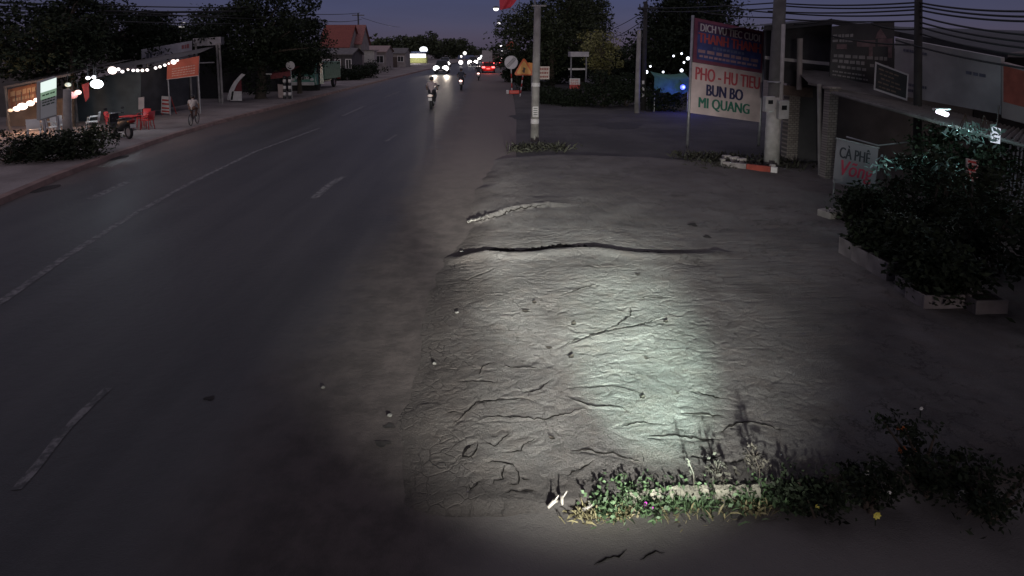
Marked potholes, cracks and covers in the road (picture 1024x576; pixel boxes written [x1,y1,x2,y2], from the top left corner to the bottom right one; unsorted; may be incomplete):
crack [472,204,545,223]
crack [594,549,665,565]
crack [446,363,784,494]
crack [480,243,704,267]
crack [561,296,665,347]
